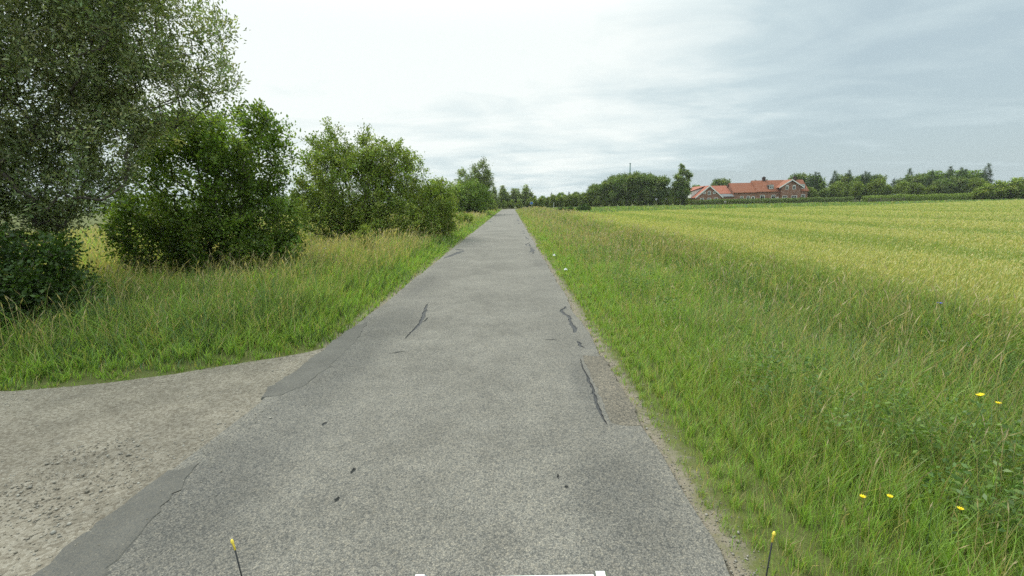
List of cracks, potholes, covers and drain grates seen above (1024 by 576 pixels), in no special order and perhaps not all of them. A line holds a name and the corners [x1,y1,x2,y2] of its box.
crack [544,306,585,348]
crack [389,304,428,354]
